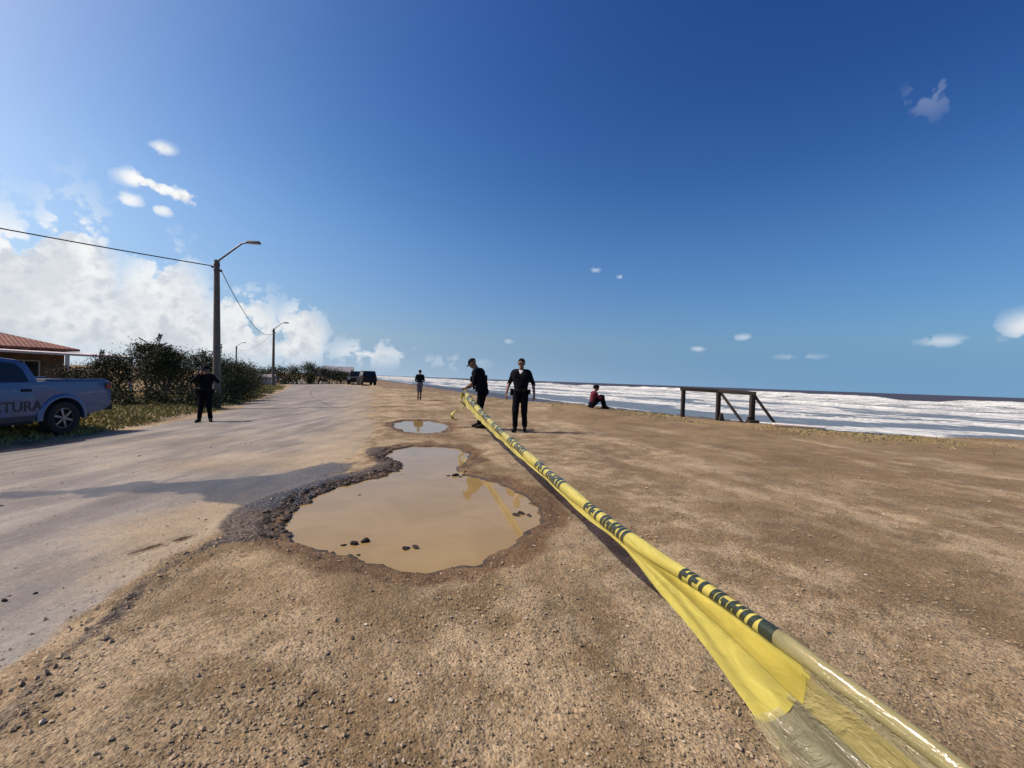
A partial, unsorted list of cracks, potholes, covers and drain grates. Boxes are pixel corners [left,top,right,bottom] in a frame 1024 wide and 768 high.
pothole [373,443,480,474]
pothole [259,470,561,583]
pothole [384,419,456,434]
